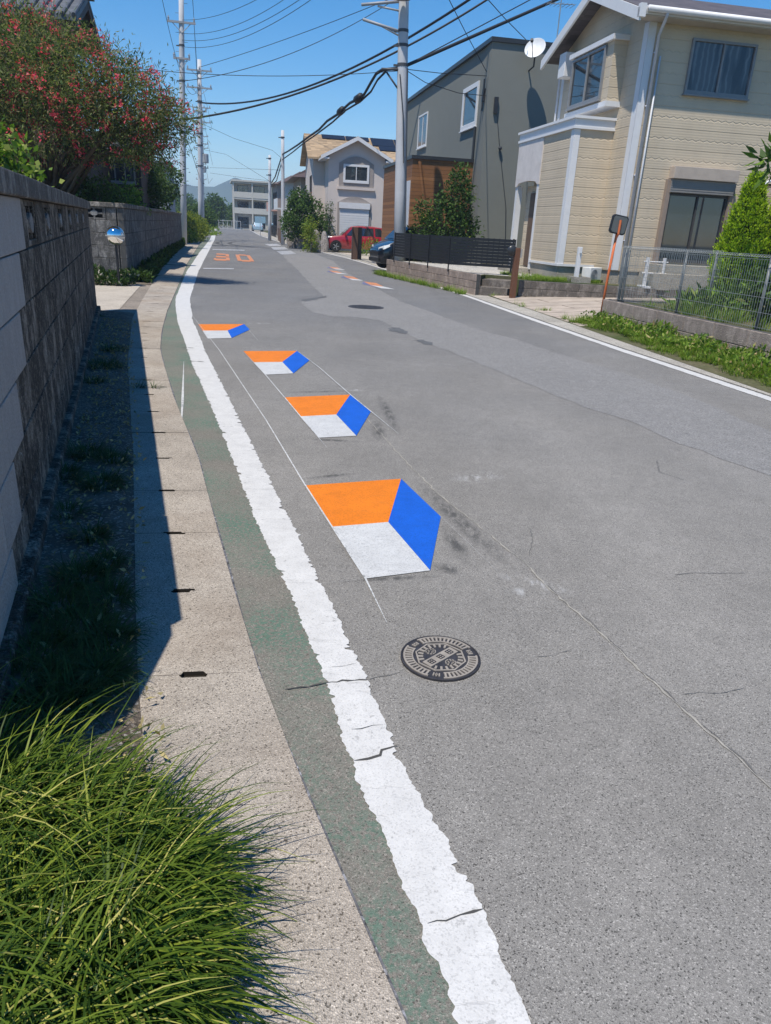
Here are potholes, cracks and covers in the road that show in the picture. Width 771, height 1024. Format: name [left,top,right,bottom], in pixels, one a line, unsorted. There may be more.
crack [357,744,399,760]
manhole cover [400,635,481,682]
crack [286,663,398,689]
crack [429,908,484,923]
